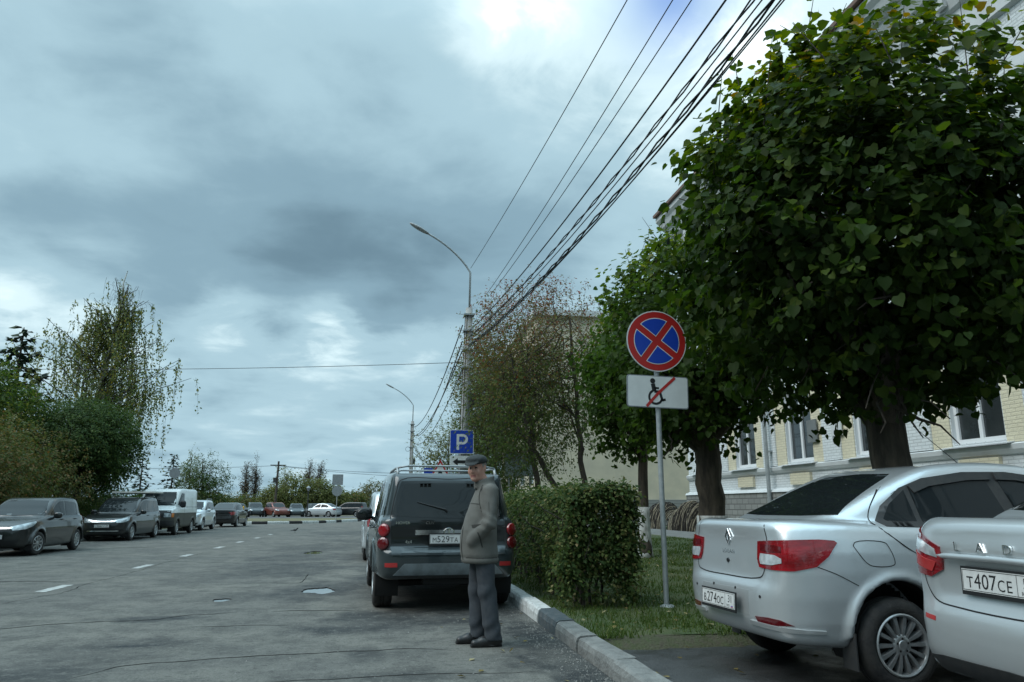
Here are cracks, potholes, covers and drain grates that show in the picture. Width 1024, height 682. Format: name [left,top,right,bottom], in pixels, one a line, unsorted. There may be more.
crack [4,612,249,629]
crack [70,648,442,679]
